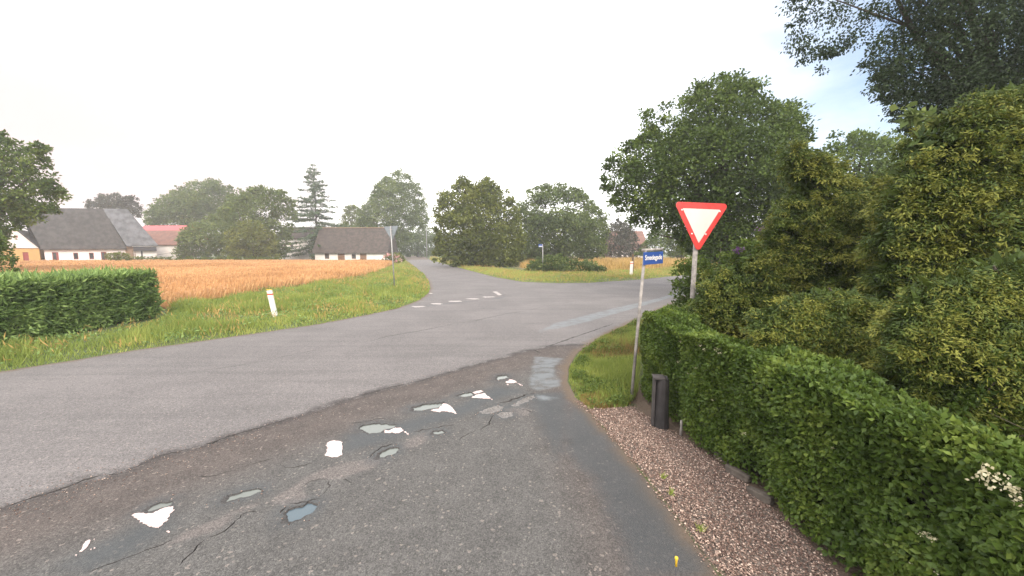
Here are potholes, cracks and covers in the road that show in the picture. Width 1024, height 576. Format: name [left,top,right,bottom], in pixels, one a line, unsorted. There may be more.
pothole [142,500,174,513]
pothole [373,447,400,460]
crack [90,511,256,572]
crack [202,458,352,513]
pothole [280,502,318,524]
pothole [409,402,445,412]
pothole [358,423,396,435]
pothole [220,488,262,504]
